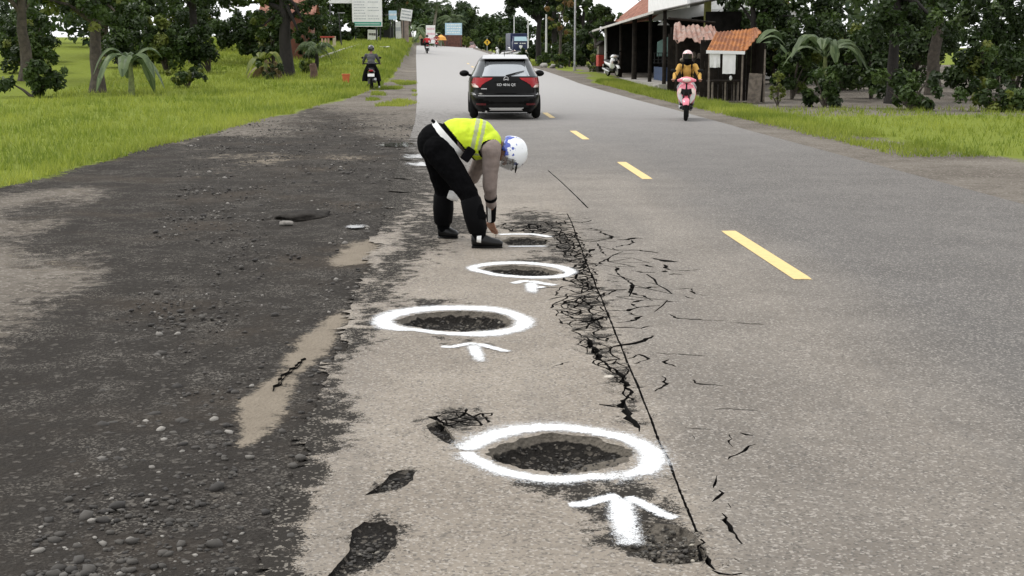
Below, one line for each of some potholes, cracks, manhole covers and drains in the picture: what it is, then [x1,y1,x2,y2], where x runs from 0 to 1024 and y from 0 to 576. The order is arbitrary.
pothole [486,433,636,475]
pothole [482,265,559,276]
crack [428,211,764,432]
pothole [393,311,513,332]
pothole [364,470,415,496]
crack [697,476,743,576]
crack [727,433,755,459]
pothole [328,521,397,576]
pothole [502,237,550,245]
